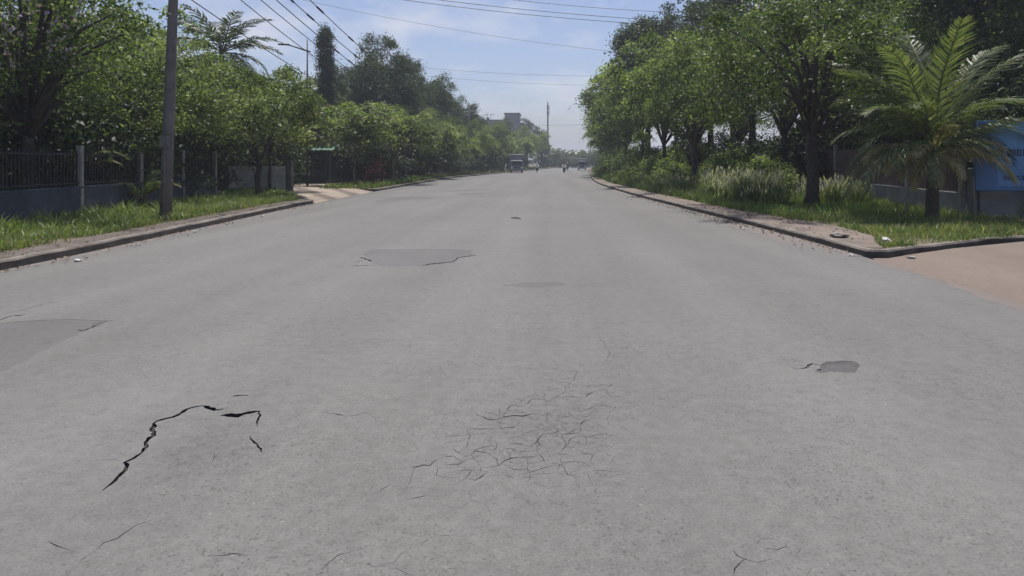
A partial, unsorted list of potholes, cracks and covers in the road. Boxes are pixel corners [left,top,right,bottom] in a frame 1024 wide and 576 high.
crack [733,536,825,576]
pothole [816,361,860,373]
crack [102,395,262,491]
crack [50,520,151,561]
crack [324,358,628,511]
